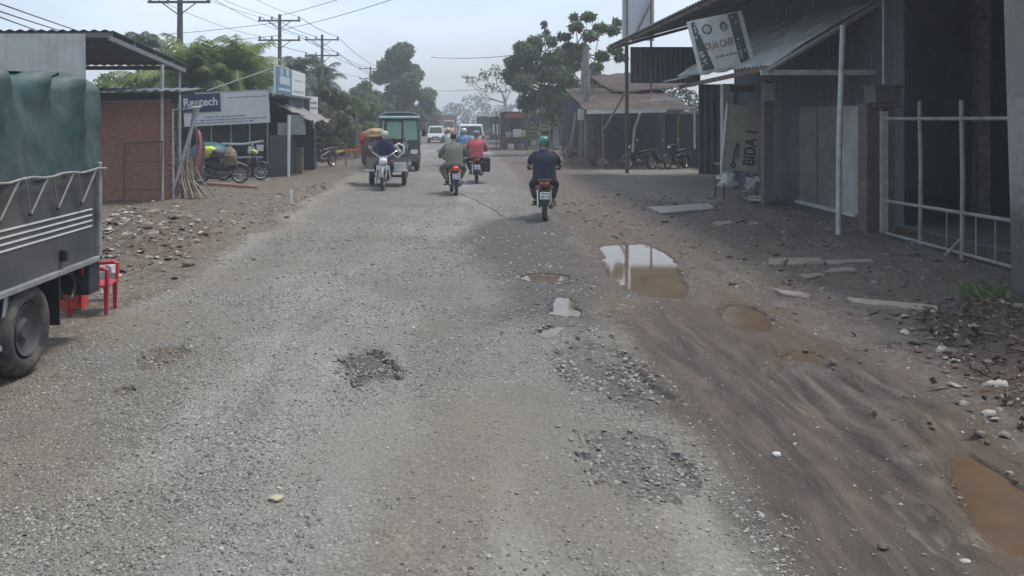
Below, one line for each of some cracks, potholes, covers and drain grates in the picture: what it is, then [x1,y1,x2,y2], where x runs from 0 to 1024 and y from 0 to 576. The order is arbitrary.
pothole [130,338,197,371]
pothole [329,338,424,390]
pothole [547,411,730,515]
pothole [776,348,828,365]
pothole [586,238,695,305]
pothole [545,294,584,318]
pothole [111,385,139,396]
pothole [716,302,780,333]
pothole [514,270,585,284]
pothole [945,447,1024,561]
